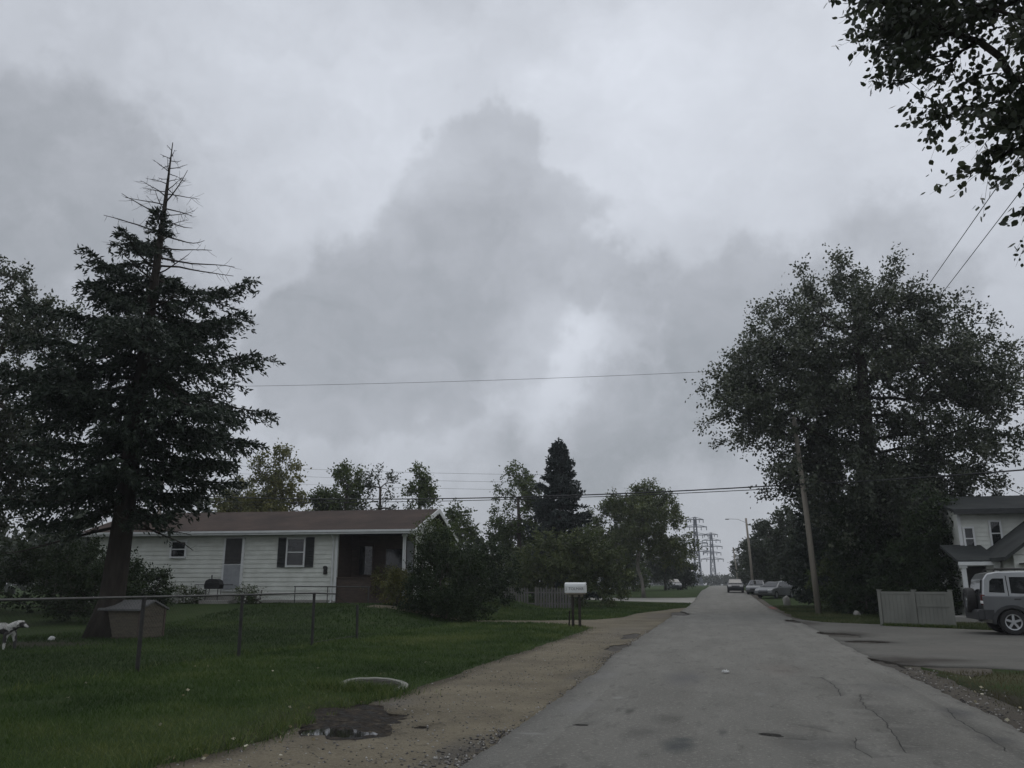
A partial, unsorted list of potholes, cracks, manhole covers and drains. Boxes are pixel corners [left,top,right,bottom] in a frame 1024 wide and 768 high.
crack [948,709,1006,751]
crack [859,695,906,753]
pothole [604,644,629,652]
pothole [298,704,408,740]
